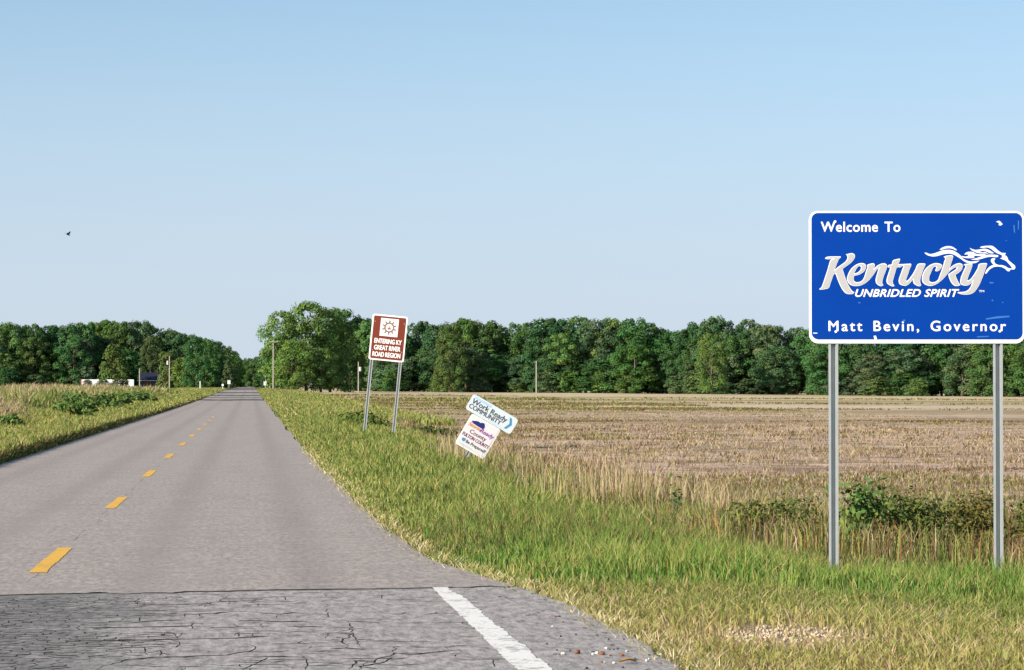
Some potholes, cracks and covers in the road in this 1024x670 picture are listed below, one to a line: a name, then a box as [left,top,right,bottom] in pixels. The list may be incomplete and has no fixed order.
crack [0,592,495,670]
